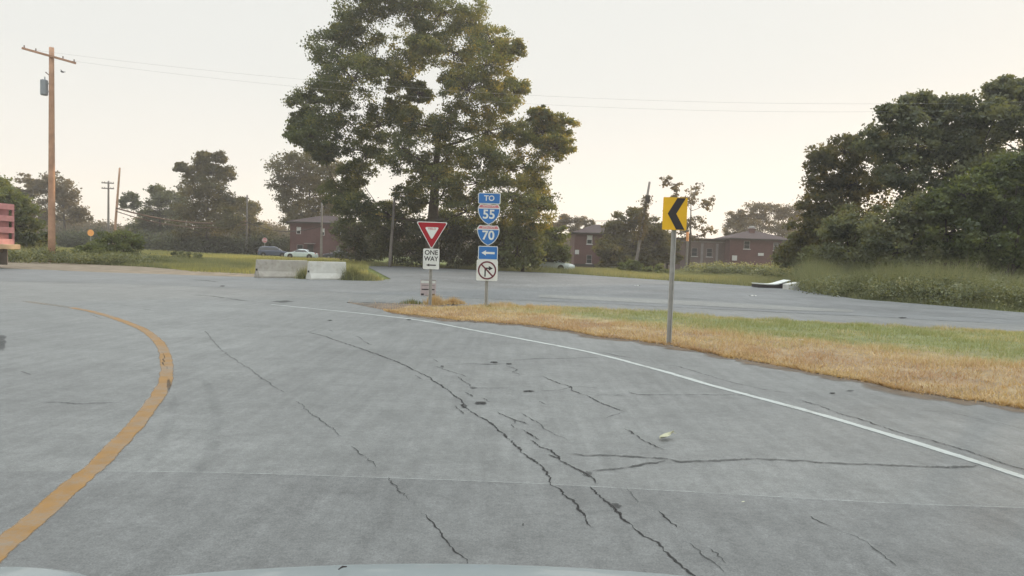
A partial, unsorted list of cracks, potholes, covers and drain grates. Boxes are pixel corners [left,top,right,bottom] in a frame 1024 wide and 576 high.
crack [309,330,724,576]
